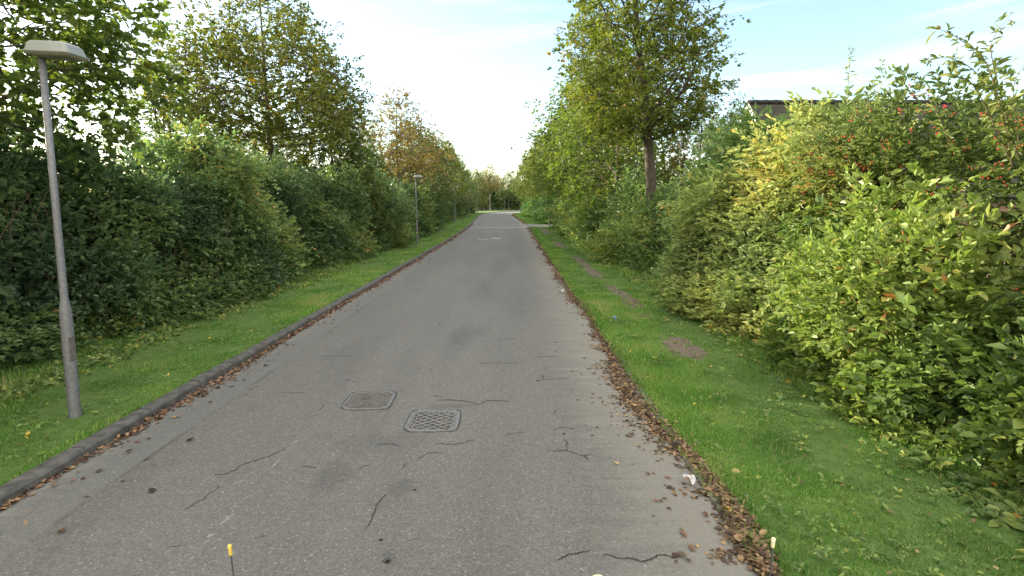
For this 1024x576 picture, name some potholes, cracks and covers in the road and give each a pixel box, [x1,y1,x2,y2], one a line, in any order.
crack [558,550,679,562]
crack [377,440,471,469]
crack [186,449,284,519]
drain grate [403,409,461,433]
manhole cover [341,391,397,410]
